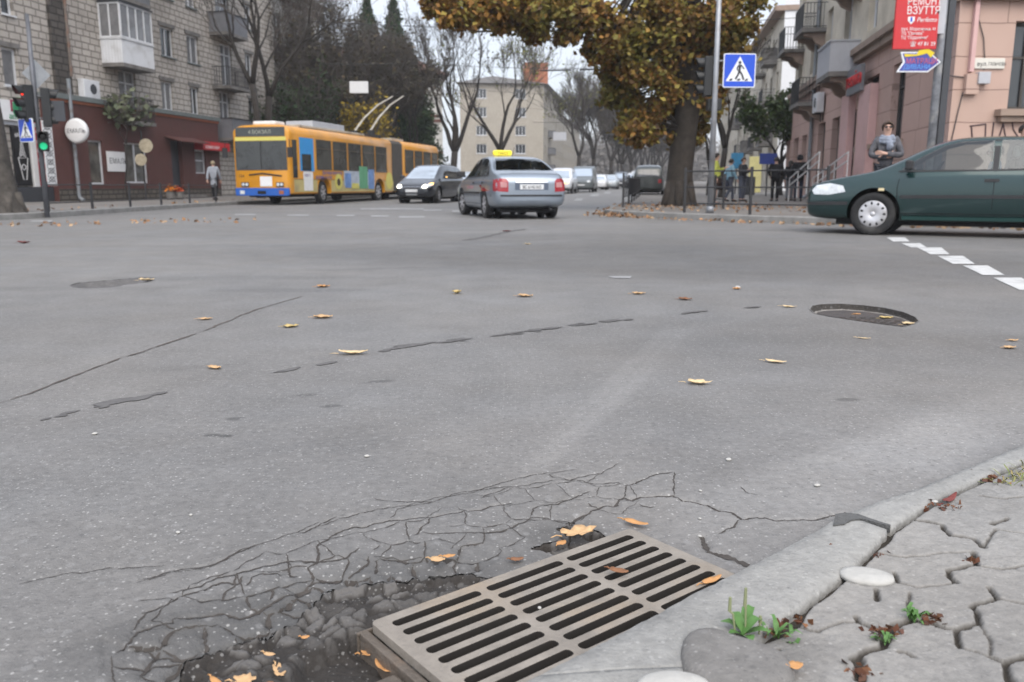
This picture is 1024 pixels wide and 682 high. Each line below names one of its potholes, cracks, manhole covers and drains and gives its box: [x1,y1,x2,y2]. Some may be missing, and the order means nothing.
drain grate [356,529,734,682]
manhole cover [809,303,920,327]
pothole [180,574,490,682]
crack [24,464,845,682]
crack [6,296,302,401]
